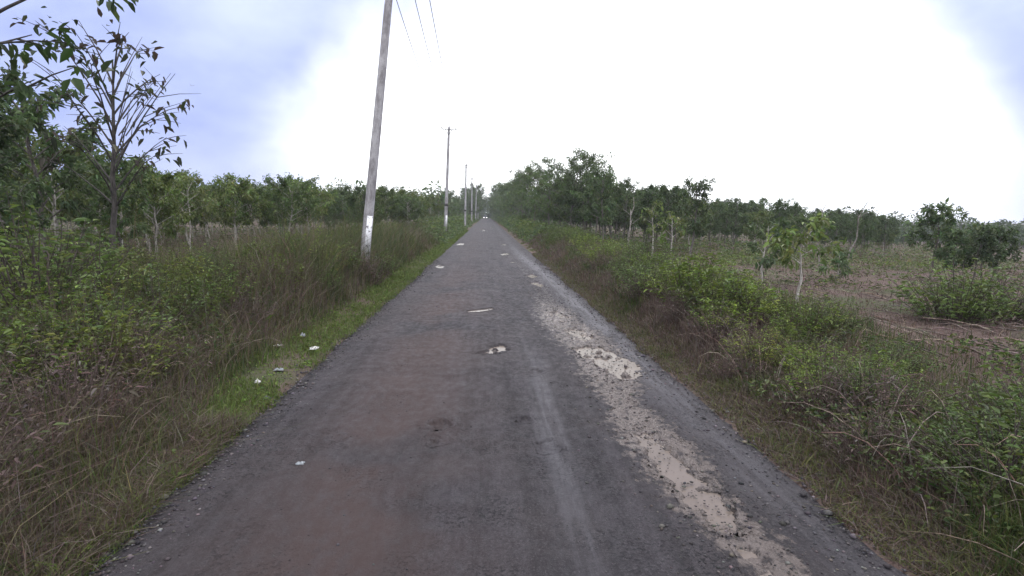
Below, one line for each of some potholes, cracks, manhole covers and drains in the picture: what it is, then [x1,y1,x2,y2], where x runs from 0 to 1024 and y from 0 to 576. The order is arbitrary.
pothole [568,343,648,381]
pothole [470,343,510,355]
pothole [510,415,538,424]
pothole [415,415,457,431]
pothole [624,429,752,538]
pothole [424,435,450,448]
